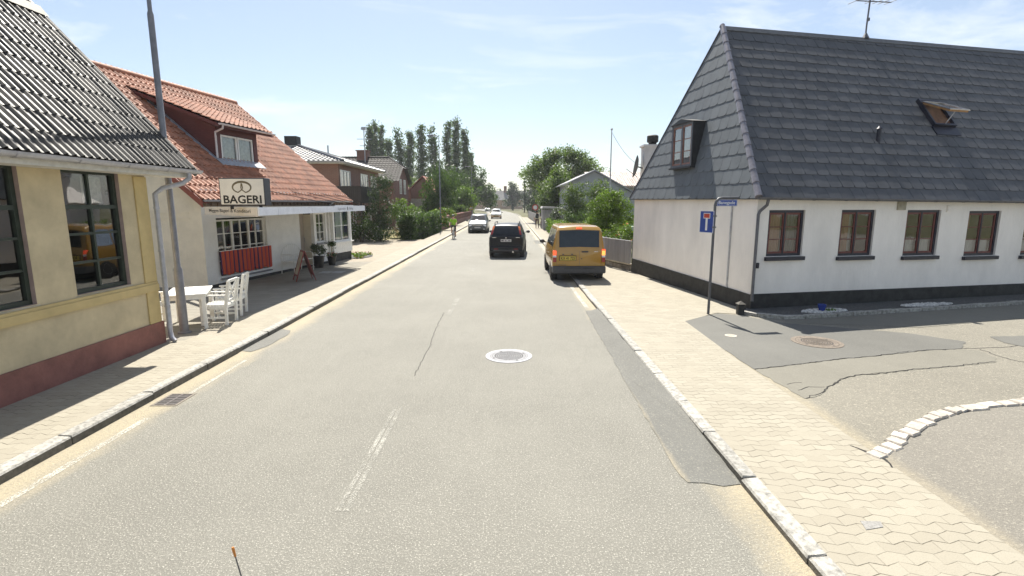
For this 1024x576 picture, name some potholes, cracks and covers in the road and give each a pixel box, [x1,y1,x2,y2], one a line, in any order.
manhole cover [791,336,844,348]
manhole cover [486,349,532,363]
drain grate [150,393,196,406]
crack [756,345,1022,398]
